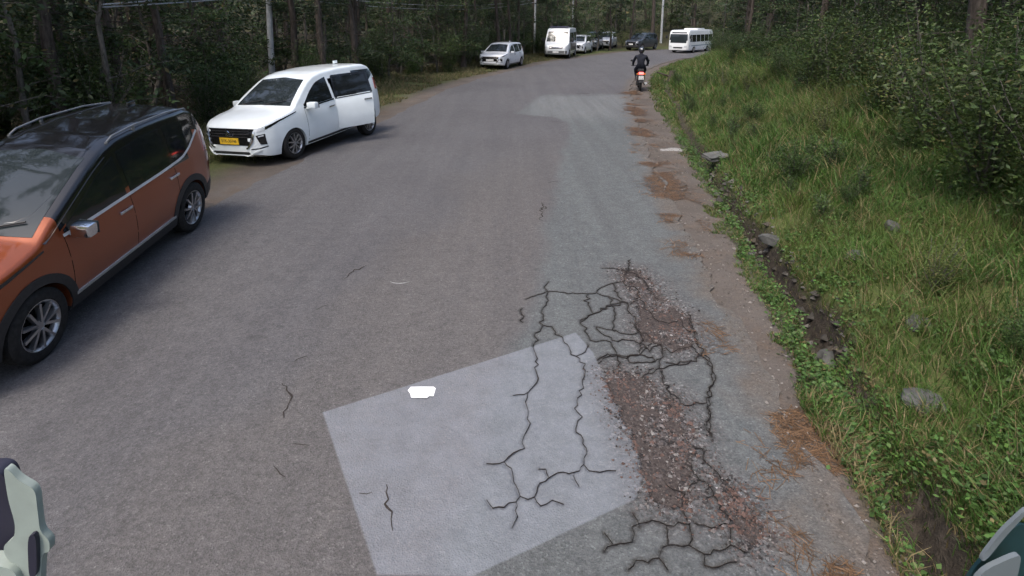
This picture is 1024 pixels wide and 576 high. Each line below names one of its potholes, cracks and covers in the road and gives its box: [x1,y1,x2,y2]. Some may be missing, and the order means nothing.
pothole [583,360,725,535]
crack [486,259,755,570]
crack [360,484,393,531]
